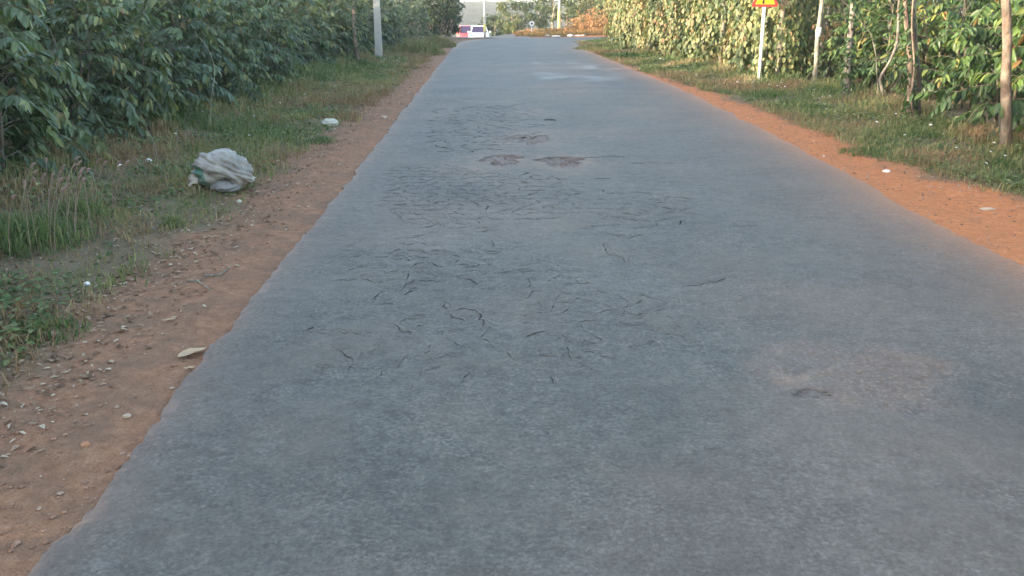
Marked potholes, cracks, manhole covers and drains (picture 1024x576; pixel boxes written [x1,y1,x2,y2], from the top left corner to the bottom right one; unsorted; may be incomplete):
crack [298,99,709,388]
pothole [474,154,528,168]
pothole [529,156,591,169]
pothole [501,134,553,147]
